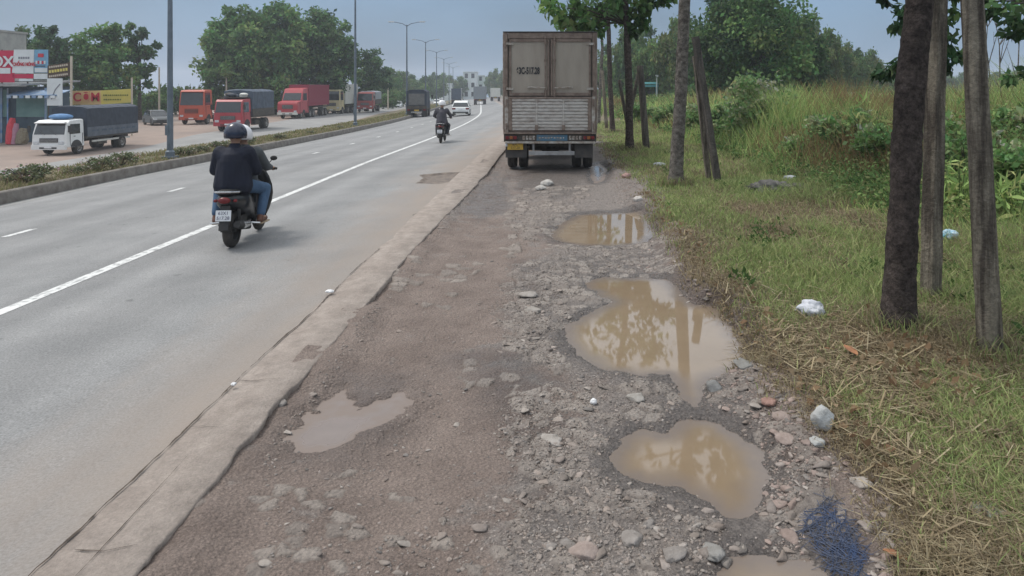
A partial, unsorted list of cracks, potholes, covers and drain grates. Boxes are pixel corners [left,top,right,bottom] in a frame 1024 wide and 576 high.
pothole [597,412,782,521]
pothole [558,275,754,409]
pothole [702,547,848,576]
pothole [547,209,657,247]
pothole [281,387,414,458]
